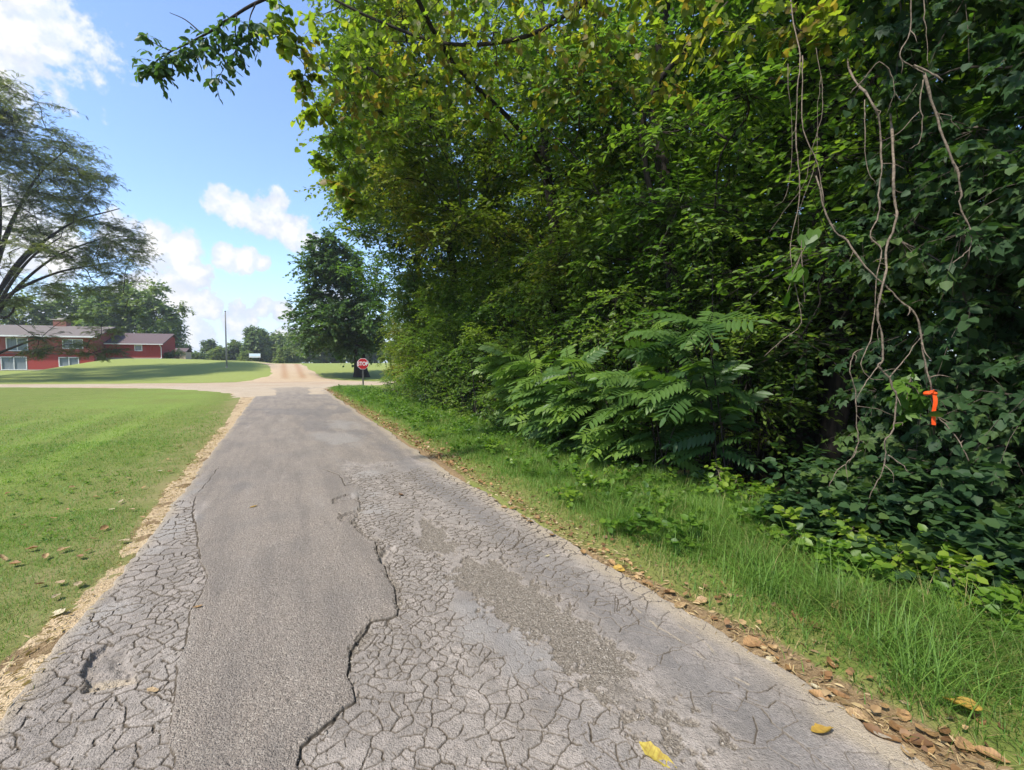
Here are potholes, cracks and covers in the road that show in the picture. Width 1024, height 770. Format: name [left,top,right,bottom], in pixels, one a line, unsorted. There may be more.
crack [298,463,921,770]
crack [0,469,217,770]
pothole [80,646,136,694]
